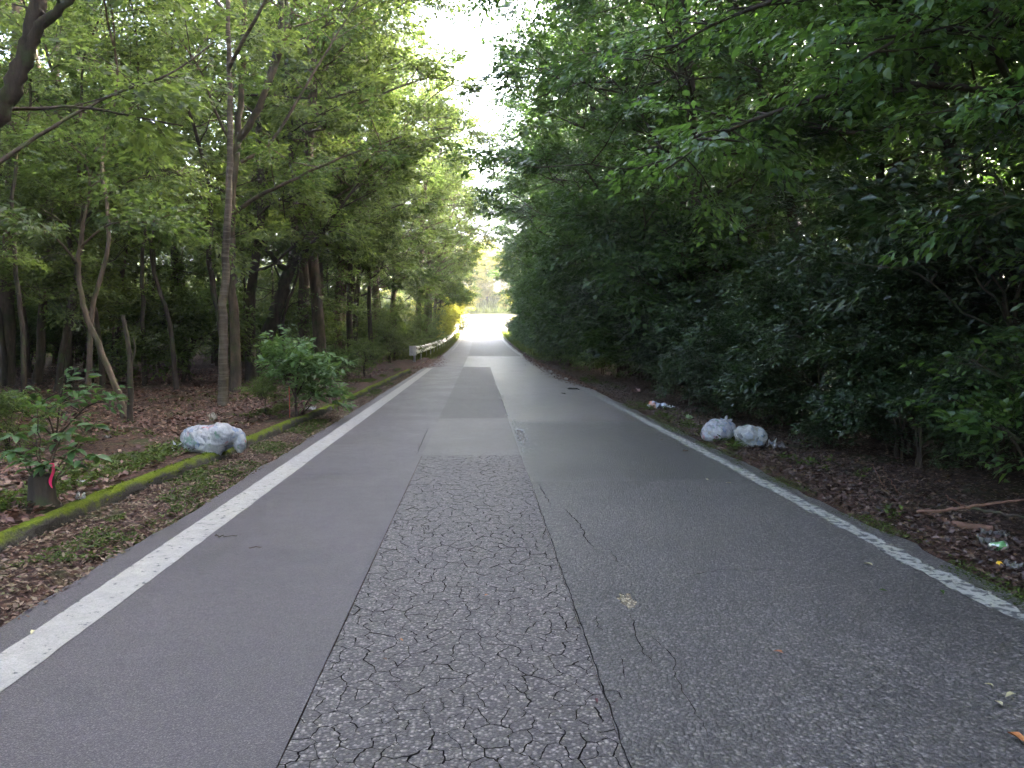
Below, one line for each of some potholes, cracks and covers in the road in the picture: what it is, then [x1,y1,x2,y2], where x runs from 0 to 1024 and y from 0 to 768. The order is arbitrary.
crack [278,455,711,768]
